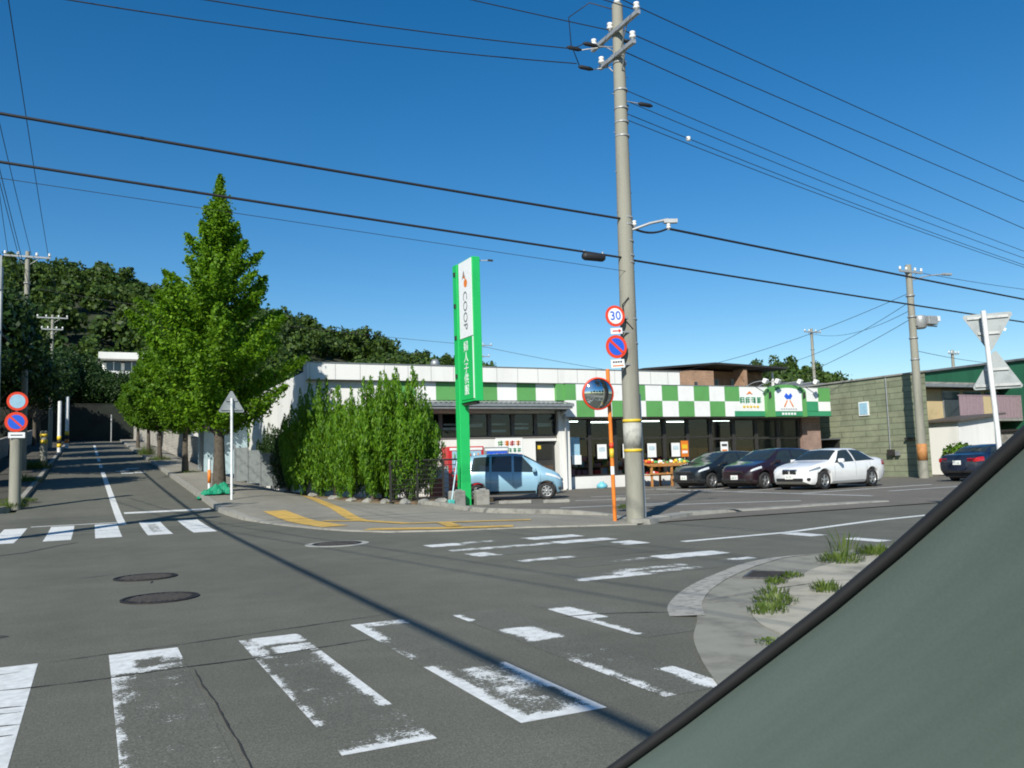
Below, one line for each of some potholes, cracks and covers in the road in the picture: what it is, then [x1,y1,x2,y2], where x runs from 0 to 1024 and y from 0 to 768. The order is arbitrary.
drain grate [742,570,793,579]
manhole cover [113,573,178,582]
manhole cover [119,591,199,605]
